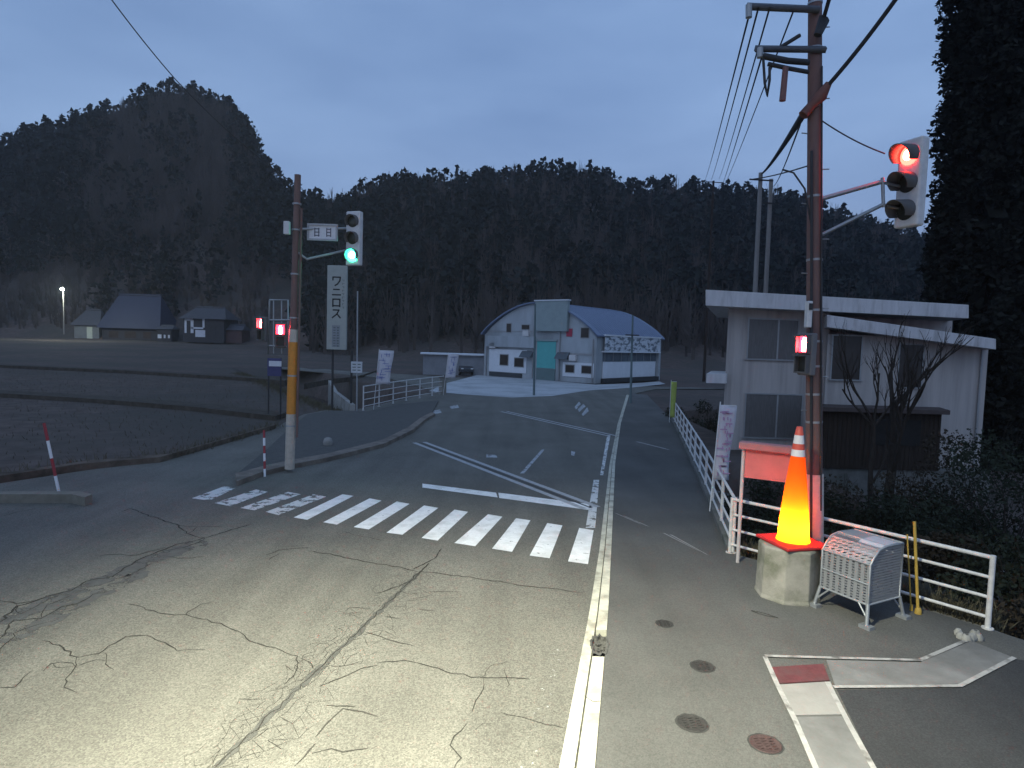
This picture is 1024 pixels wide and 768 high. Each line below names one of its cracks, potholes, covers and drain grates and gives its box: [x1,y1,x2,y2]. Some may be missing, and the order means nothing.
manhole cover [689,660,716,673]
crack [0,635,202,692]
crack [0,508,250,649]
crack [379,660,563,768]
manhole cover [747,733,785,755]
crack [422,543,582,593]
manhole cover [655,619,674,628]
crack [131,602,313,684]
manhole cover [674,713,710,733]
